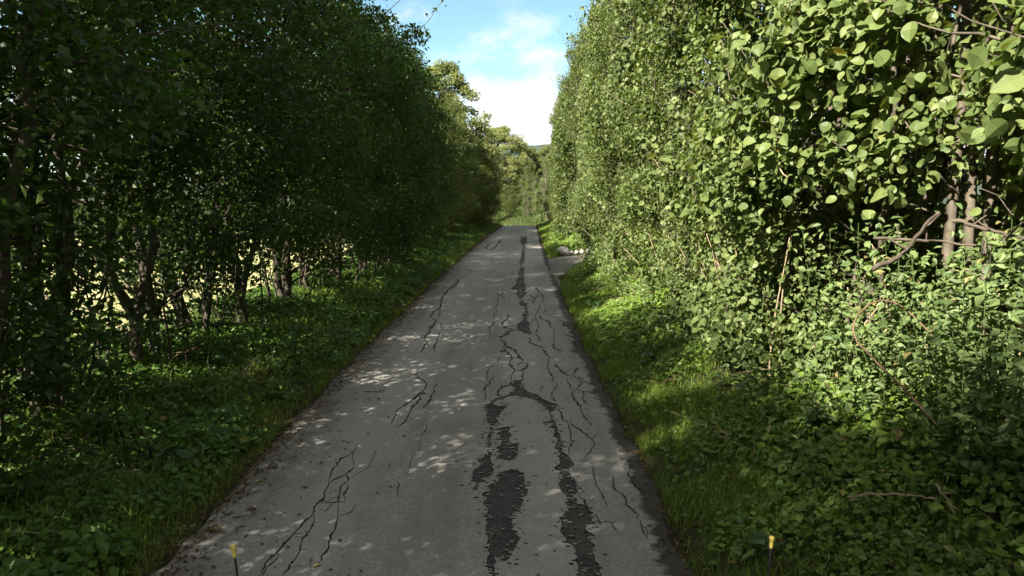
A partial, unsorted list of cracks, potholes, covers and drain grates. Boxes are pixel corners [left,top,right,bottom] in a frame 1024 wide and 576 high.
crack [483,288,651,539]
crack [259,270,474,576]
